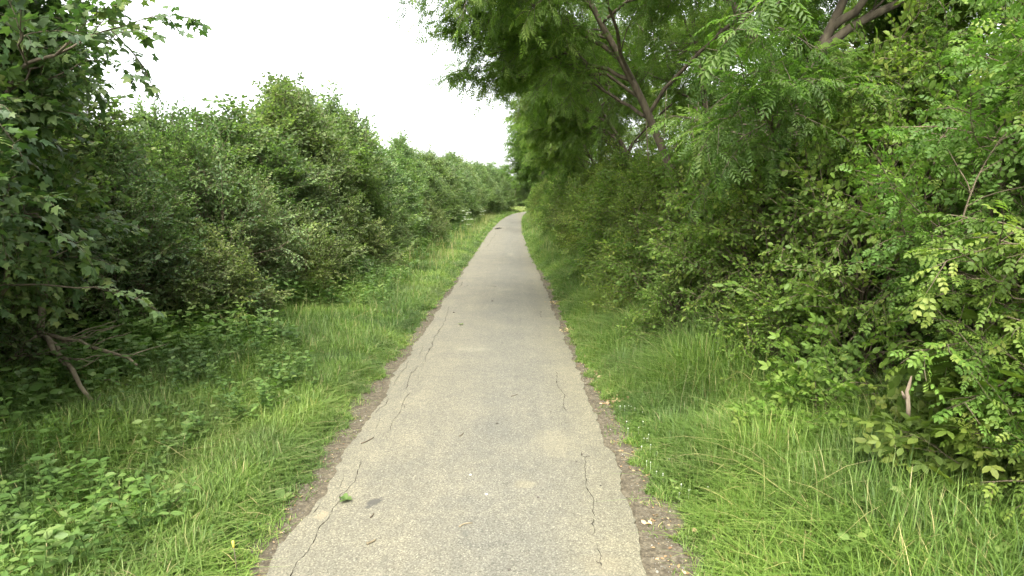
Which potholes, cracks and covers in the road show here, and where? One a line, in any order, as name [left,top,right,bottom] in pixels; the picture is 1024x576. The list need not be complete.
crack [376,307,449,429]
crack [581,452,602,566]
crack [290,462,361,576]
